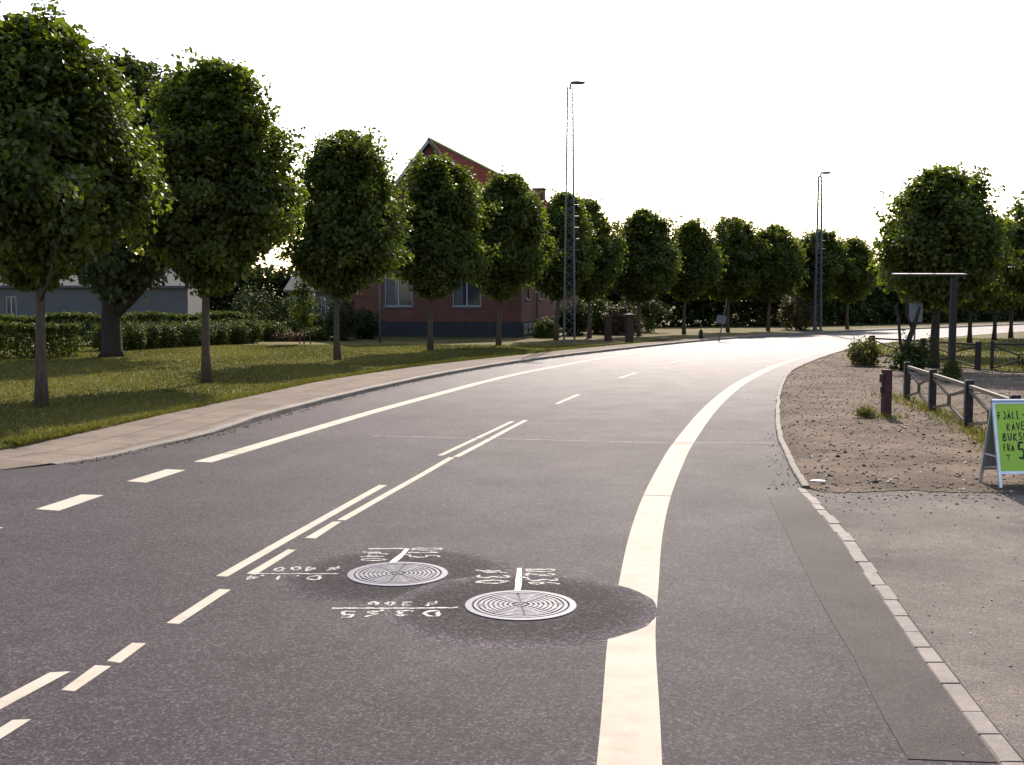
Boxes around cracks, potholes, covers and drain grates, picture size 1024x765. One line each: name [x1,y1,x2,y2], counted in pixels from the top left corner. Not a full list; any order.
manhole cover [465,590,577,621]
manhole cover [347,562,448,587]
